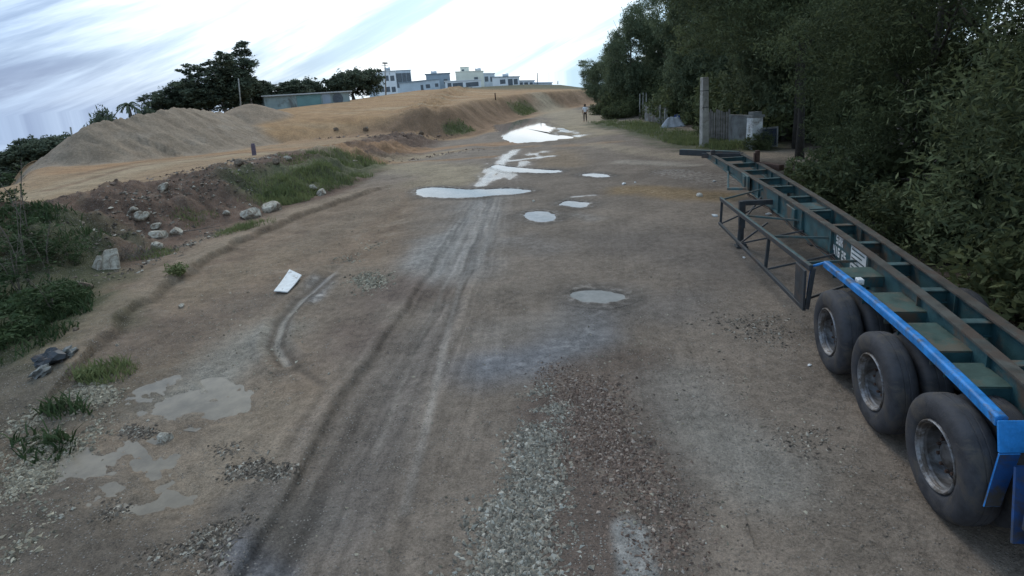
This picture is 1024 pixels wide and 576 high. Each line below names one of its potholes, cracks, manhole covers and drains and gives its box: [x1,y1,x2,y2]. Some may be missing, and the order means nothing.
pothole [555,284,641,309]
pothole [550,199,599,209]
pothole [515,209,565,224]
pothole [409,186,539,200]
